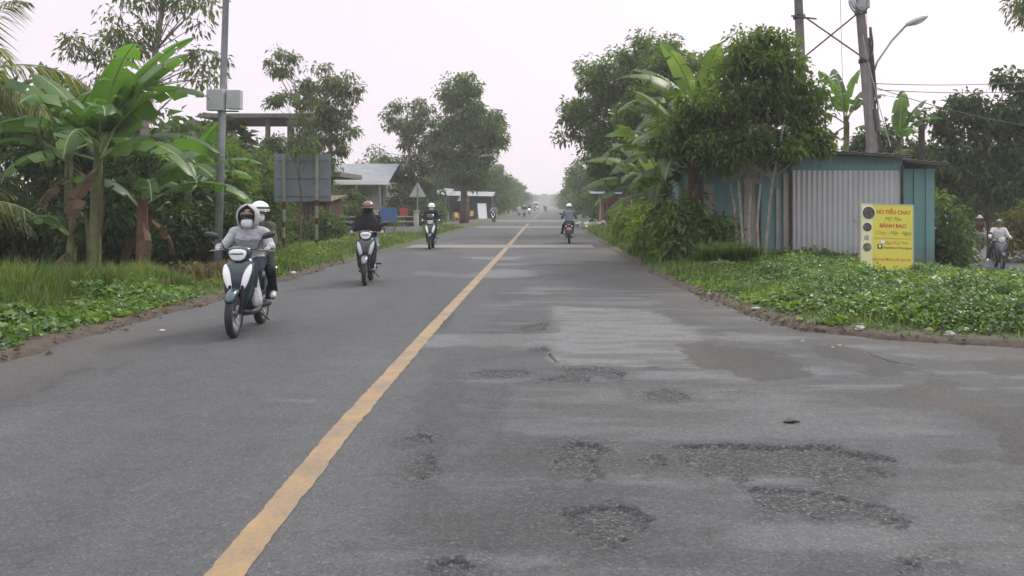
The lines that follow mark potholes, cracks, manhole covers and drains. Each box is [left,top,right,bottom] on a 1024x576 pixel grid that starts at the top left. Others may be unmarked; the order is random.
pothole [401,452,450,484]
pothole [395,432,441,447]
pothole [552,497,670,553]
pothole [621,451,674,470]
crack [858,351,921,367]
pothole [739,483,931,532]
pothole [664,441,913,493]
pothole [533,366,632,384]
pothole [455,368,539,379]
pothole [515,321,555,333]
pothole [543,440,623,488]
pothole [637,387,704,405]
